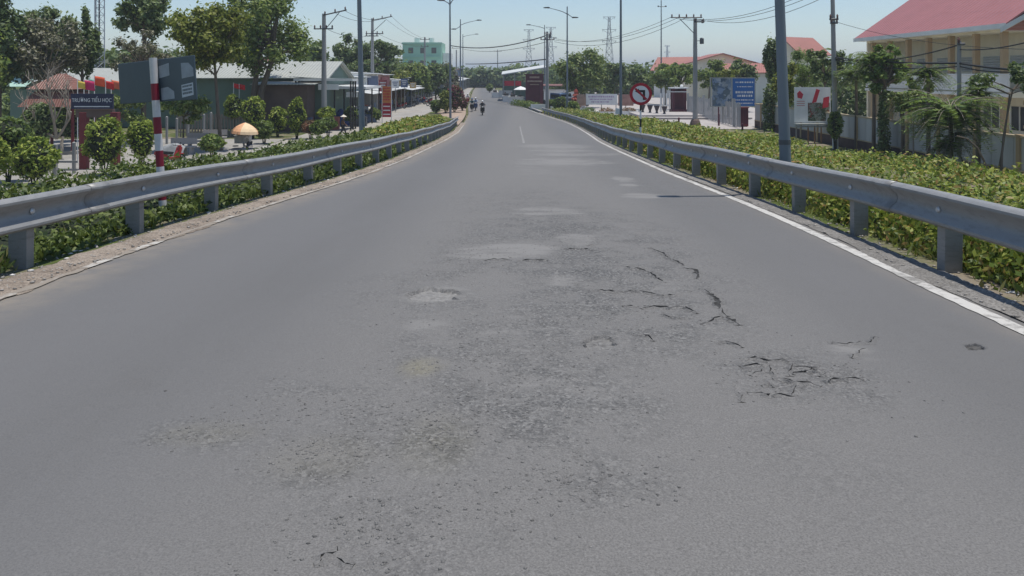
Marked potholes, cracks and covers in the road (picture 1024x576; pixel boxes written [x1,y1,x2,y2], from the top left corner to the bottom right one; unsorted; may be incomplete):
crack [586,247,880,402]
crack [313,545,355,569]
pothole [392,285,475,305]
